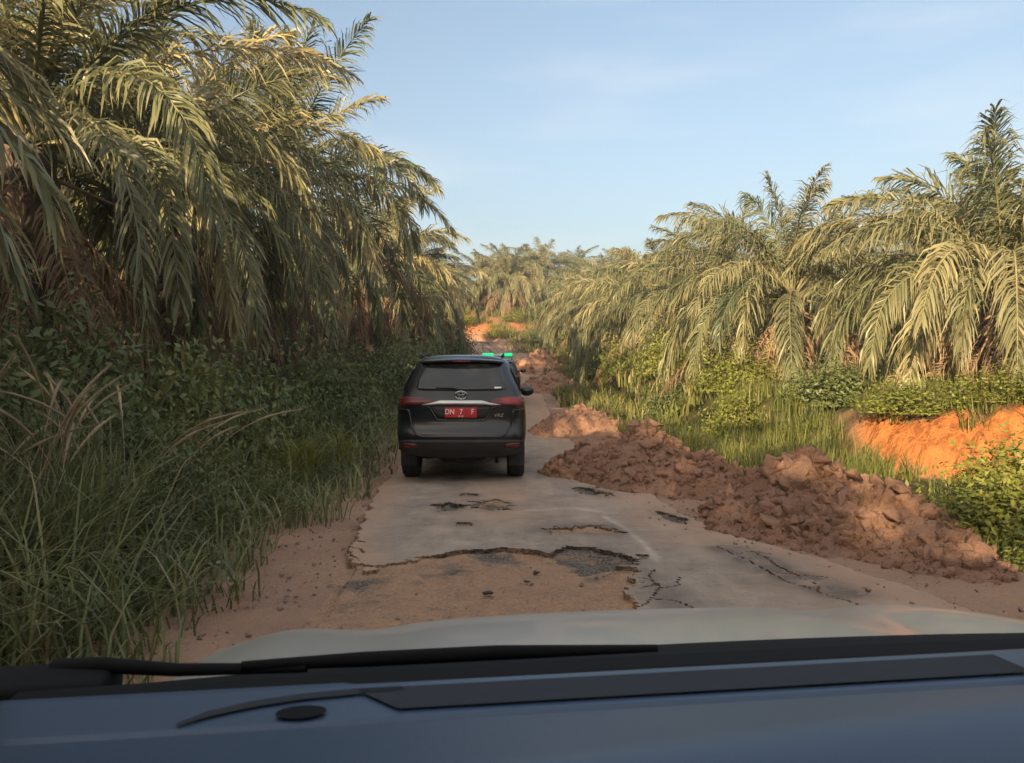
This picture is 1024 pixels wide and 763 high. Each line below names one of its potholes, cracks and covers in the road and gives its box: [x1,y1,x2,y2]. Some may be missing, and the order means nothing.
pothole [430,502,468,511]
crack [638,569,694,608]
pothole [296,547,645,630]
pothole [467,499,514,511]
crack [716,546,859,605]
pothole [655,511,688,524]
pothole [540,525,628,535]
pothole [571,487,615,497]
